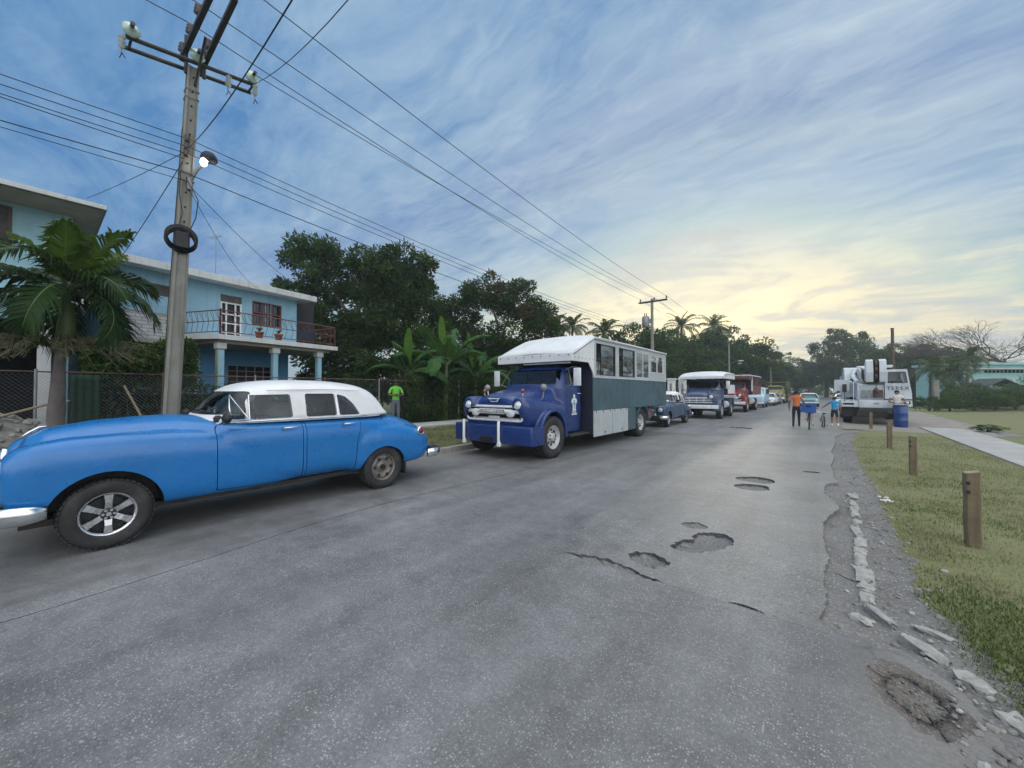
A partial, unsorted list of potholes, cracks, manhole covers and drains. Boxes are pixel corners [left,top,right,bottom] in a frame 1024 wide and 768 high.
pothole [864,657,978,745]
pothole [628,551,670,569]
pothole [670,532,734,553]
